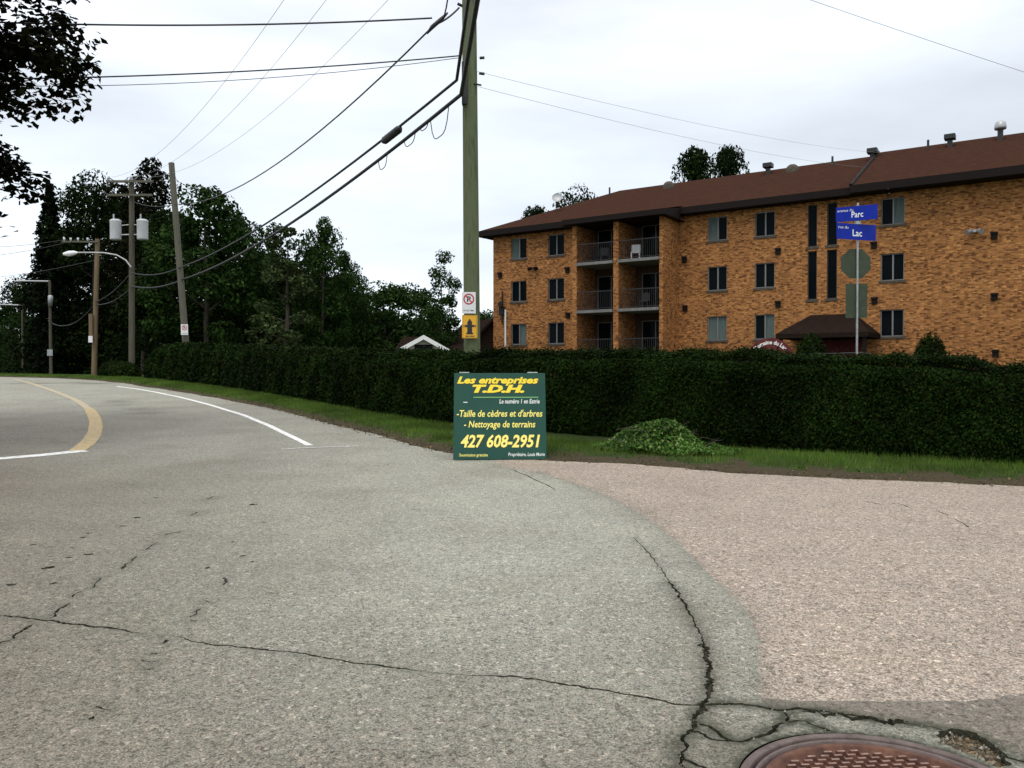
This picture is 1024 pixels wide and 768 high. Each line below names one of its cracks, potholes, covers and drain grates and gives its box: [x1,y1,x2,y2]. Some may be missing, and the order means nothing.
crack [0,497,1024,768]
manhole cover [740,733,989,768]
pothole [936,728,1012,768]
